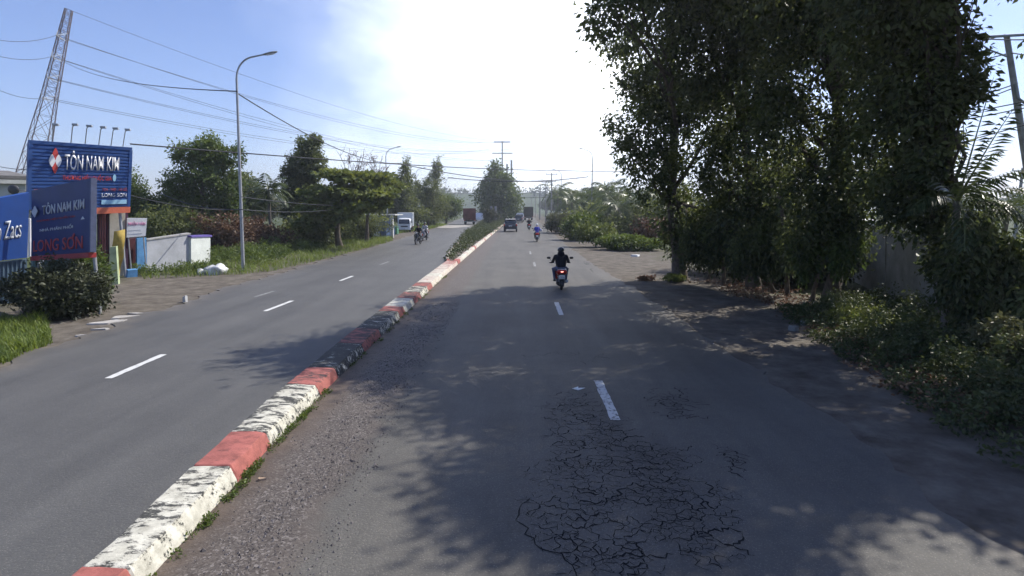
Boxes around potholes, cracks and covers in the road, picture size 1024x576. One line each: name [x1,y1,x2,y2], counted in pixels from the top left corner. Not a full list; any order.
crack [515,389,755,576]
